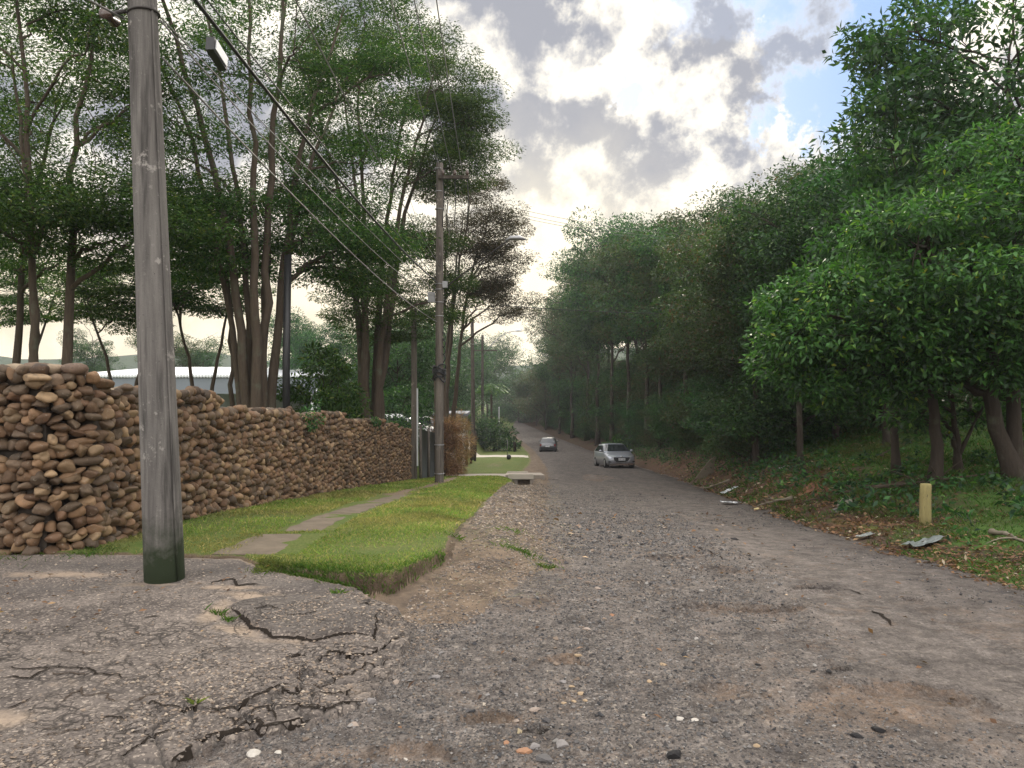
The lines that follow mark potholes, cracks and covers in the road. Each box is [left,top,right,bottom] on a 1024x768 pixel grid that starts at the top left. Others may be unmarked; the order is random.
crack [0,602,399,762]
pothole [460,711,516,725]
crack [211,578,257,586]
